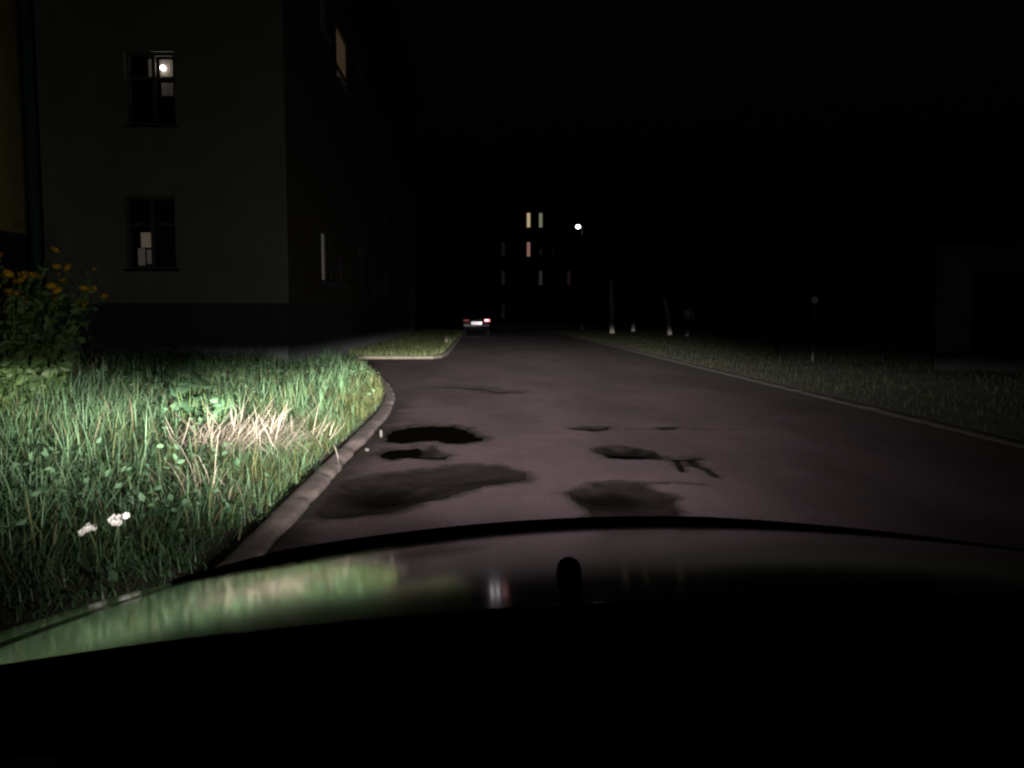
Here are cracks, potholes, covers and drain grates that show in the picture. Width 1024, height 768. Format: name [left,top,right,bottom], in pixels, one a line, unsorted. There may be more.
pothole [378,446,449,460]
crack [646,456,718,484]
pothole [384,424,485,444]
pothole [594,446,663,460]
